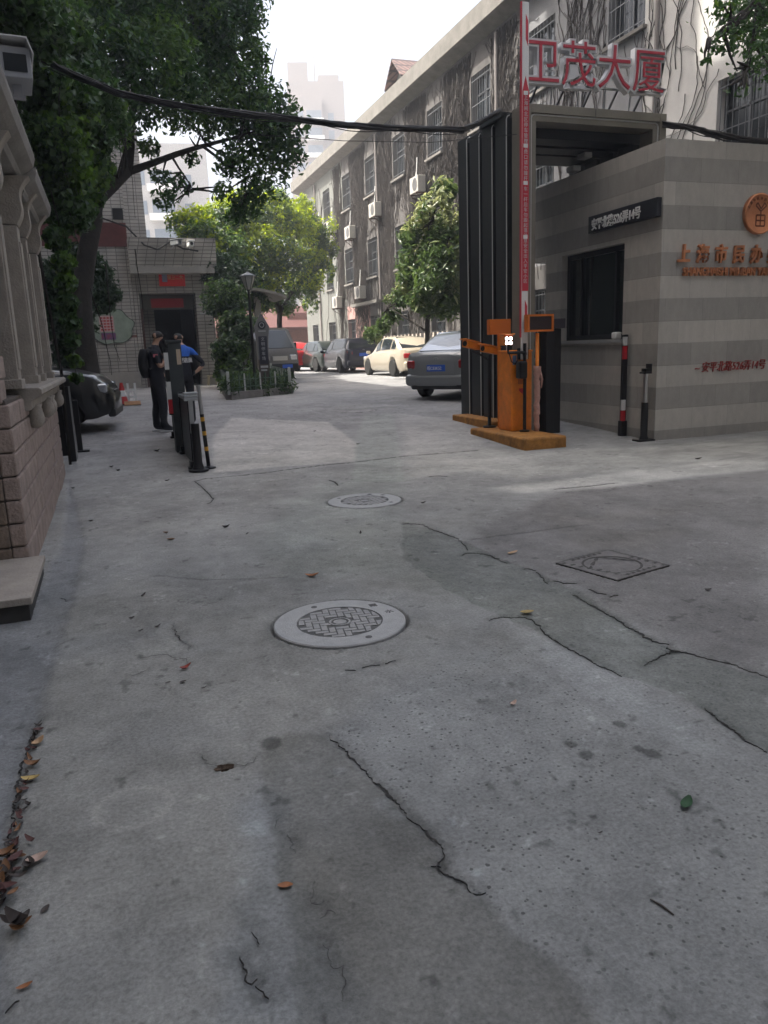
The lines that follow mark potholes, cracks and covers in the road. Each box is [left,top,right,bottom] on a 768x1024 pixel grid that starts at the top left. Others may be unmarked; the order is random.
crack [489,568,768,678]
crack [405,523,506,563]
crack [329,735,486,896]
crack [239,933,269,999]
manhole cover [556,550,669,581]
manhole cover [274,600,406,650]
manhole cover [328,493,401,509]
